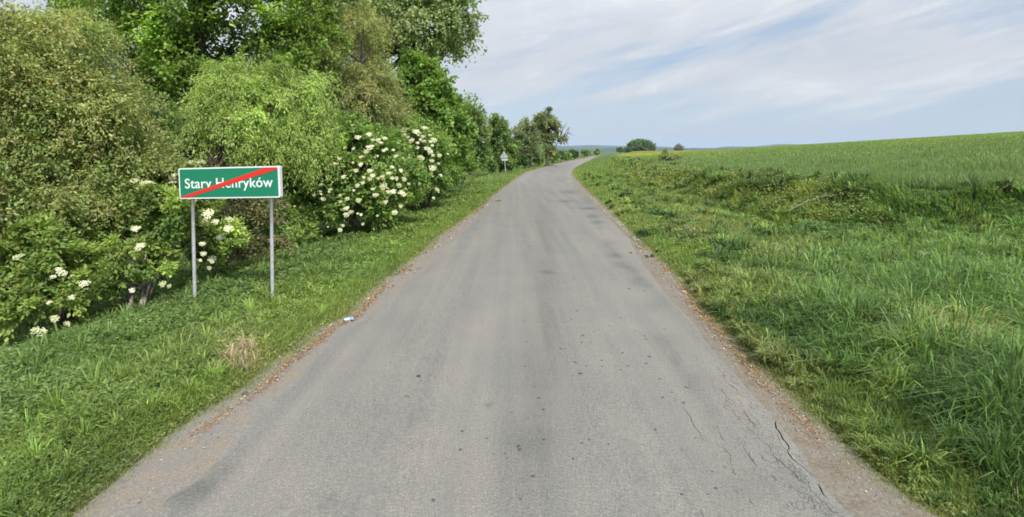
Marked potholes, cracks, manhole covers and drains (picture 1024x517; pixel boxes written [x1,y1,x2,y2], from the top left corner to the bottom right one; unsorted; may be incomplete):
crack [674,355,843,517]
